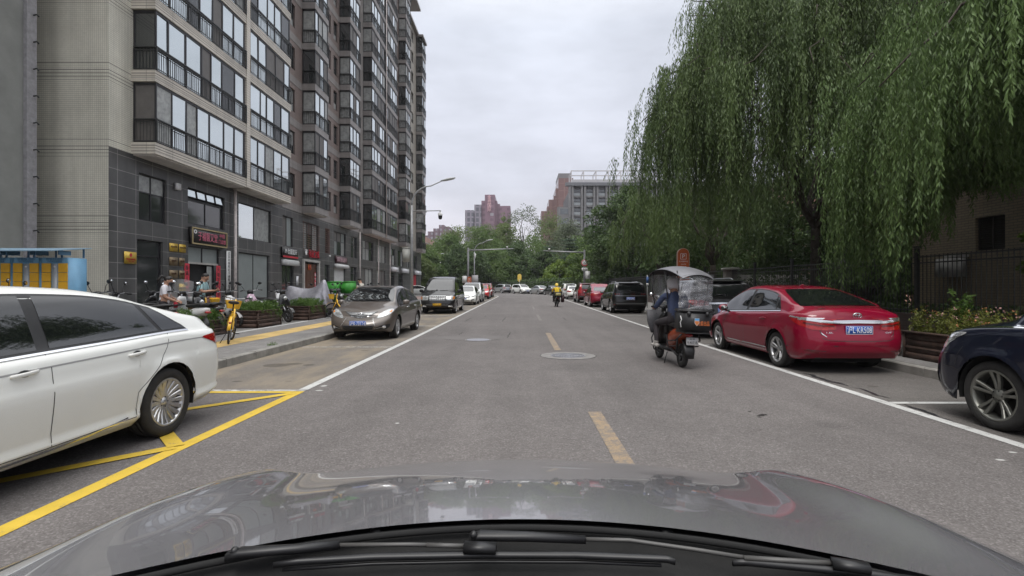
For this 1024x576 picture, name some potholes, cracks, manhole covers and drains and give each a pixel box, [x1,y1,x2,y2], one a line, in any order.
manhole cover [540,352,596,360]
